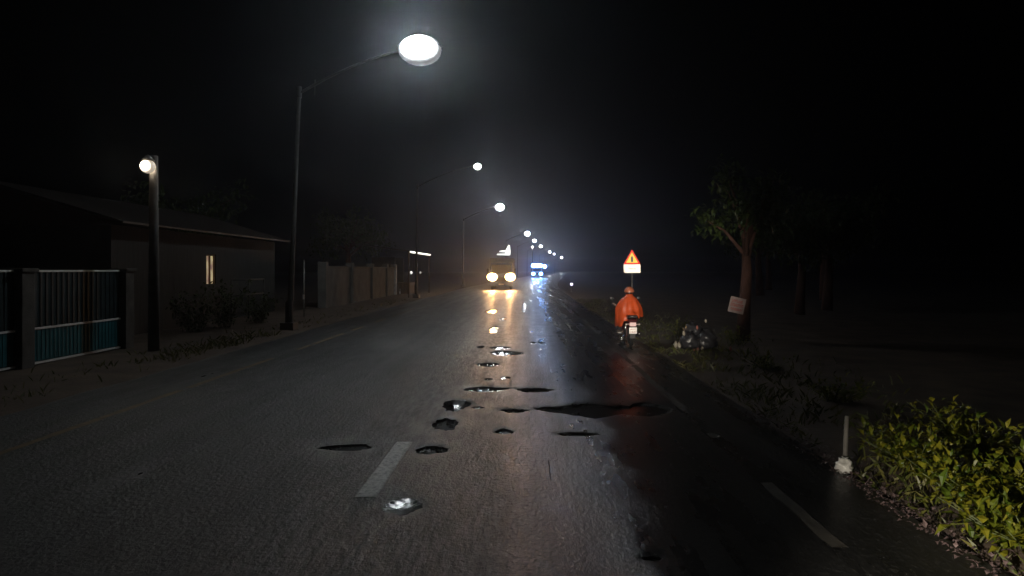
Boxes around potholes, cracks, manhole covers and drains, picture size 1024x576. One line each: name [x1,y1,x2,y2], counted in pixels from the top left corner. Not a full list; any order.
pothole [382,498,423,515]
pothole [432,418,458,431]
pothole [536,403,674,419]
pothole [442,400,471,412]
pothole [415,446,448,454]
